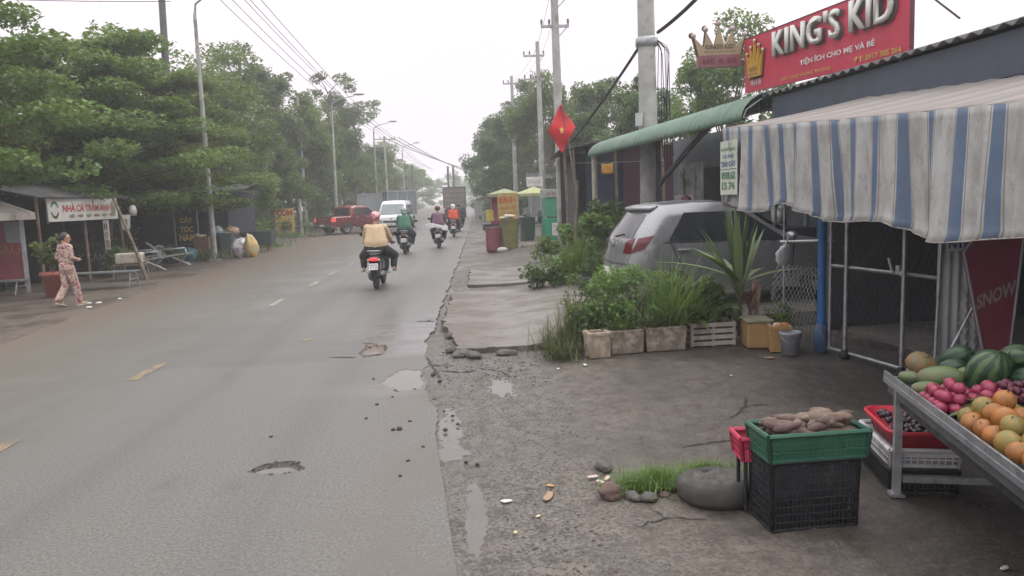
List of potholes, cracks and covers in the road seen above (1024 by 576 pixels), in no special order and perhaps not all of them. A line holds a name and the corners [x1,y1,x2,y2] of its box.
pothole [248,461,305,475]
crack [636,508,701,527]
crack [730,397,768,418]
pothole [358,344,388,358]
